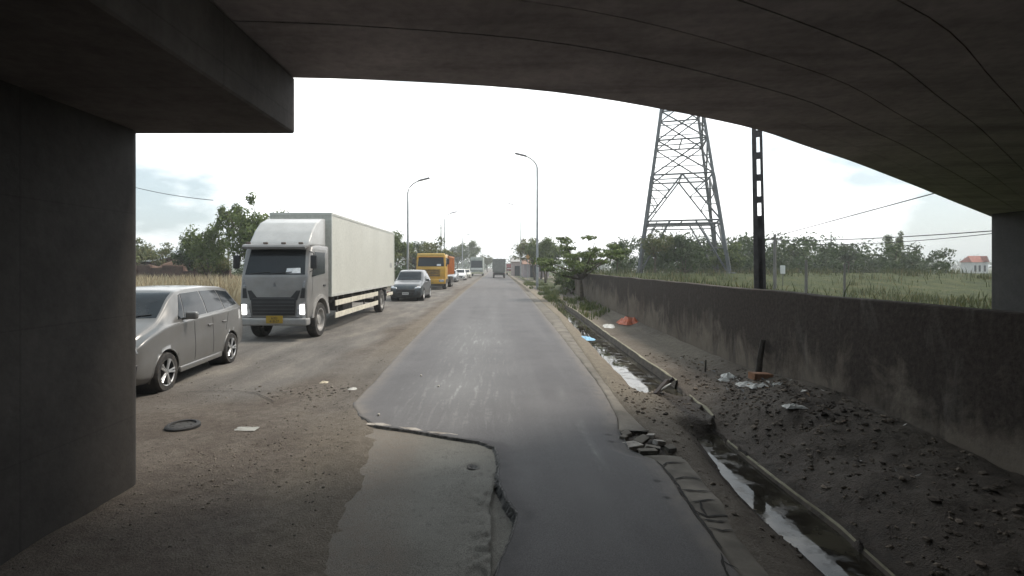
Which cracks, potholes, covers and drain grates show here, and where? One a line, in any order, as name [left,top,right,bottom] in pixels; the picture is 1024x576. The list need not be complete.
manhole cover [164,419,201,432]
